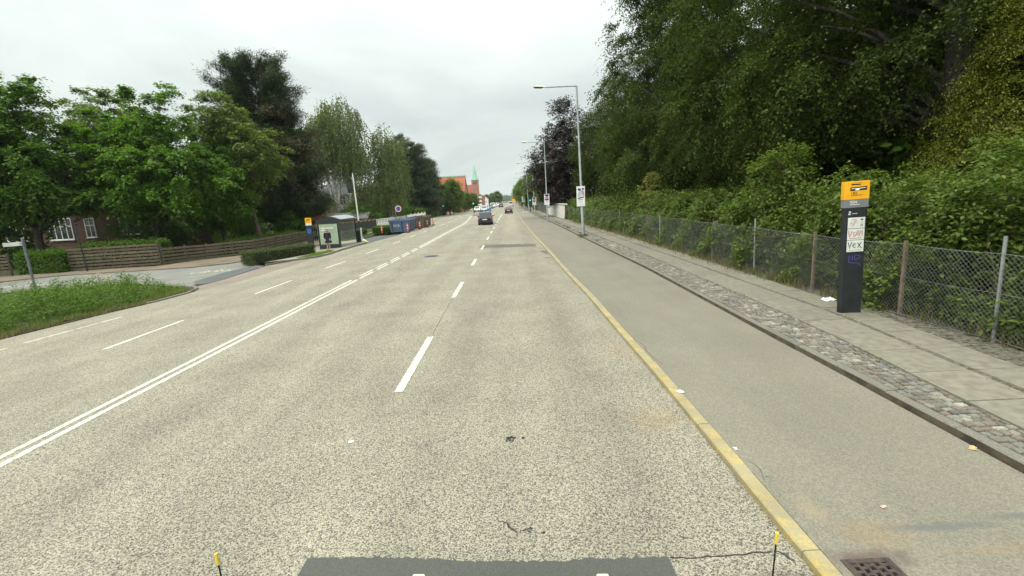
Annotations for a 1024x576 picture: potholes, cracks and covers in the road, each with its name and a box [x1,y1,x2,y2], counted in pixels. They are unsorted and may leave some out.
drain grate [839,557,908,576]
crack [502,521,545,534]
crack [670,551,795,562]
